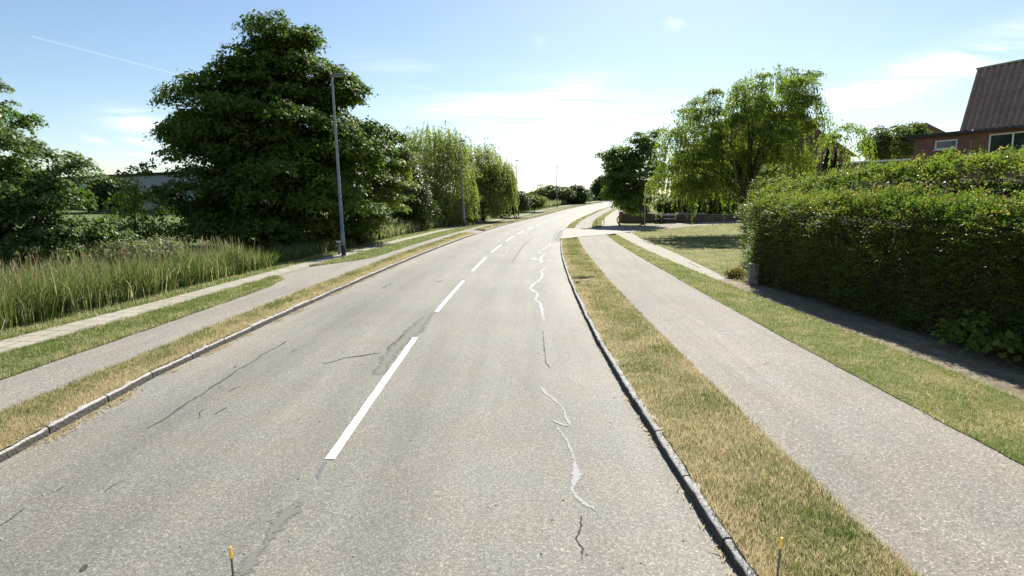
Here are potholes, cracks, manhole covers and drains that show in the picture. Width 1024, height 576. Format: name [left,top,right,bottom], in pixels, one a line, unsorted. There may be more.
crack [575,515,584,556]
